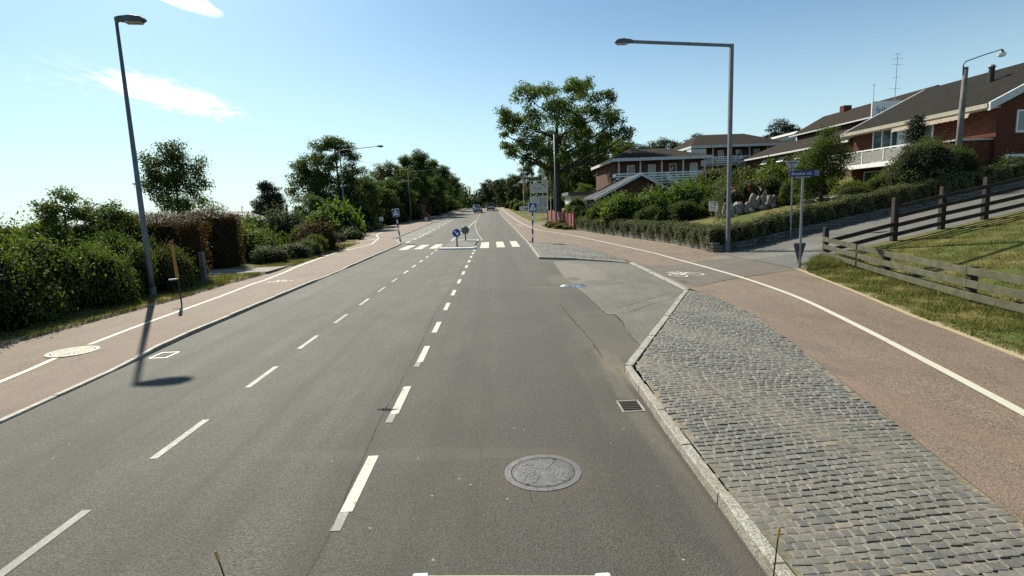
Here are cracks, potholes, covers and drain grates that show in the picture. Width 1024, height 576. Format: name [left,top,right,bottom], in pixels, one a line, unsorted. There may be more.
manhole cover [504,454,582,492]
manhole cover [44,346,100,358]
drain grate [616,400,646,412]
